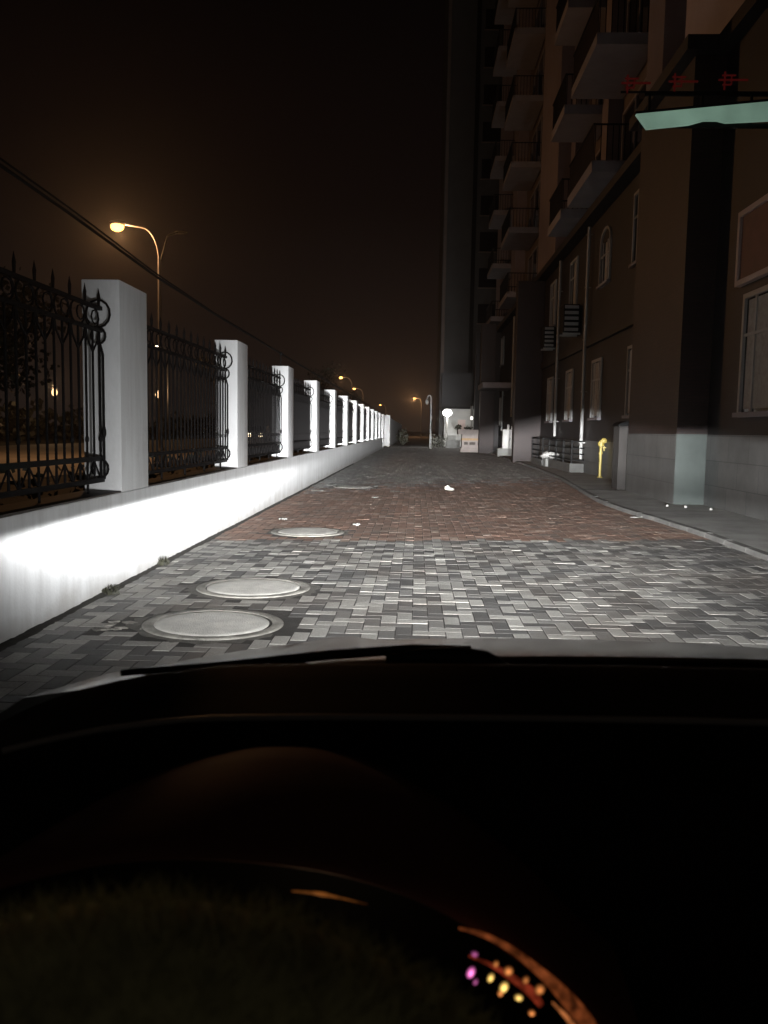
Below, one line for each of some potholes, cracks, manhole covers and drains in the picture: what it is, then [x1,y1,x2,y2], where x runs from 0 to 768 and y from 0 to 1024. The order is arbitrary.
manhole cover [184,577,321,600]
manhole cover [268,527,348,538]
manhole cover [125,609,284,645]
